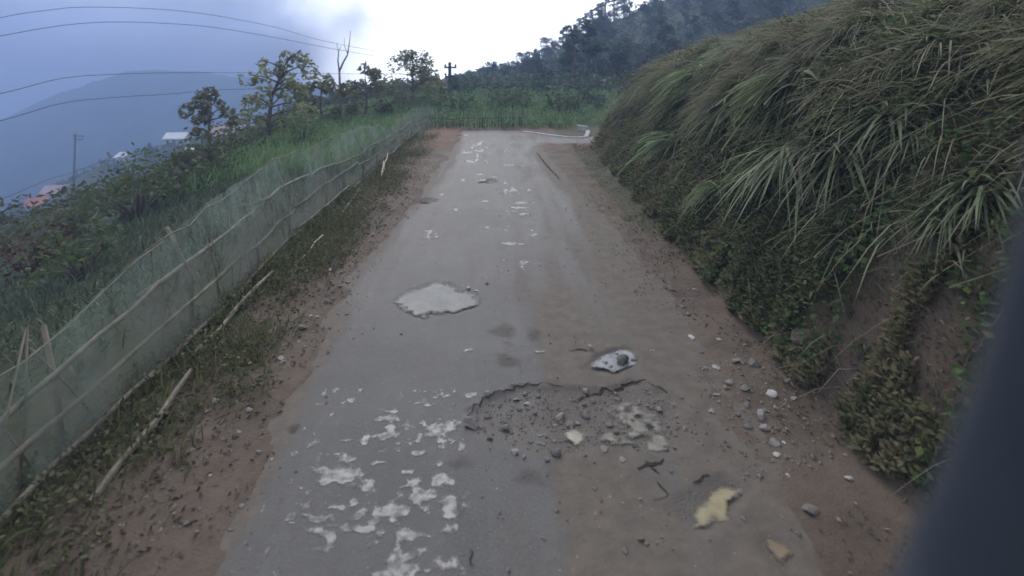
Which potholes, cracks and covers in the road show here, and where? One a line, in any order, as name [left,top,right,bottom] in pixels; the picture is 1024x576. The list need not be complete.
pothole [460,377,692,461]
